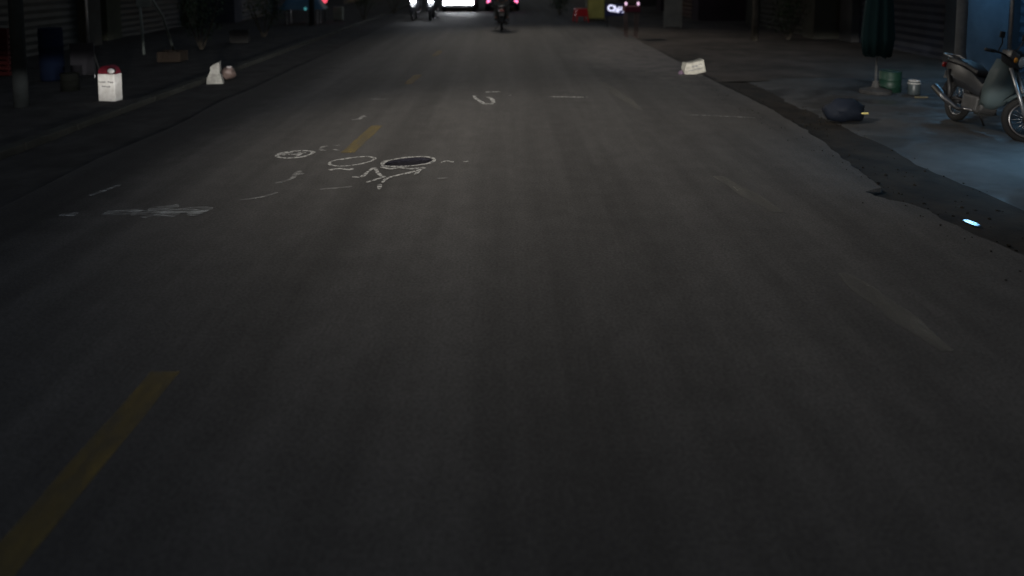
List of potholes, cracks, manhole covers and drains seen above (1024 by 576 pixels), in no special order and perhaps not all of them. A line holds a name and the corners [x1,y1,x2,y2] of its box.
pothole [385,157,432,166]
